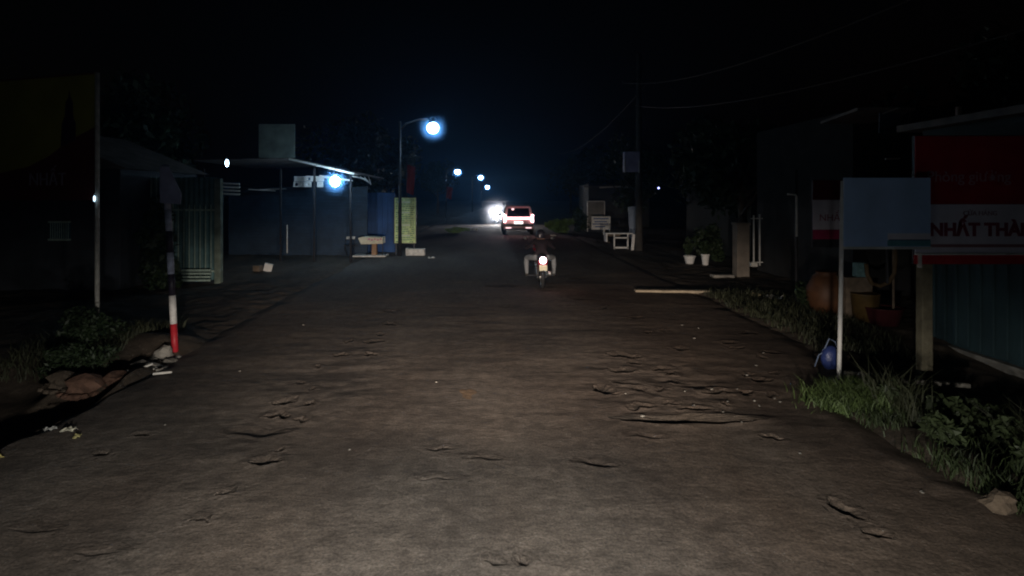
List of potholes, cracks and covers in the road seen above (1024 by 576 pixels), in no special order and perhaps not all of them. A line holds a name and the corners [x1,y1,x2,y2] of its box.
pothole [499,547,544,573]
pothole [174,507,223,527]
pothole [203,482,247,500]
pothole [216,424,299,441]
pothole [472,547,520,574]
pothole [255,407,297,422]
pothole [562,453,628,472]
pothole [239,451,292,469]
pothole [601,411,776,428]
